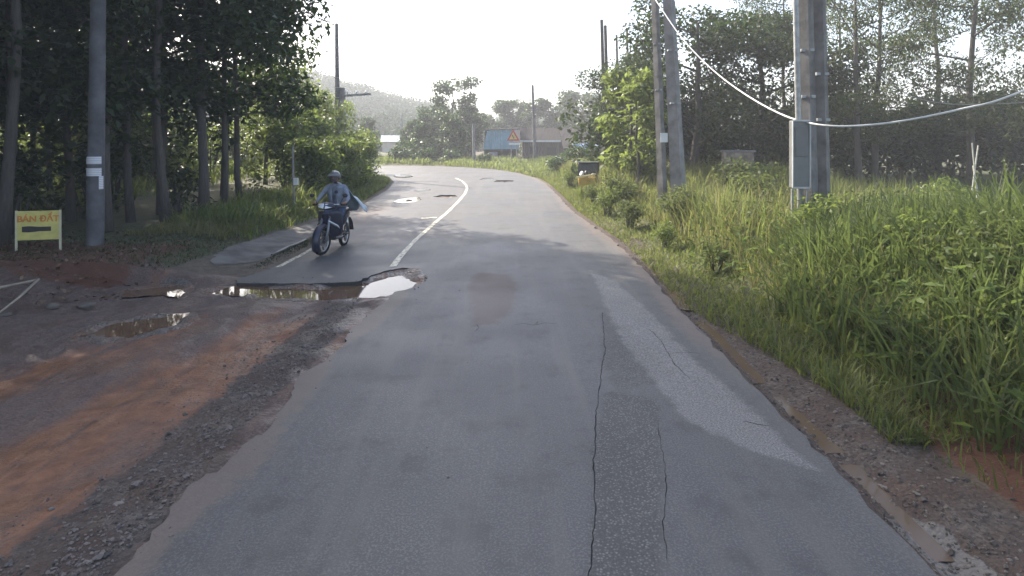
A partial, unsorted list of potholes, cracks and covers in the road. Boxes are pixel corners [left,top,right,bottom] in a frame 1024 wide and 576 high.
pothole [68,312,202,345]
crack [658,425,667,559]
crack [588,313,606,576]
pothole [197,268,426,302]
